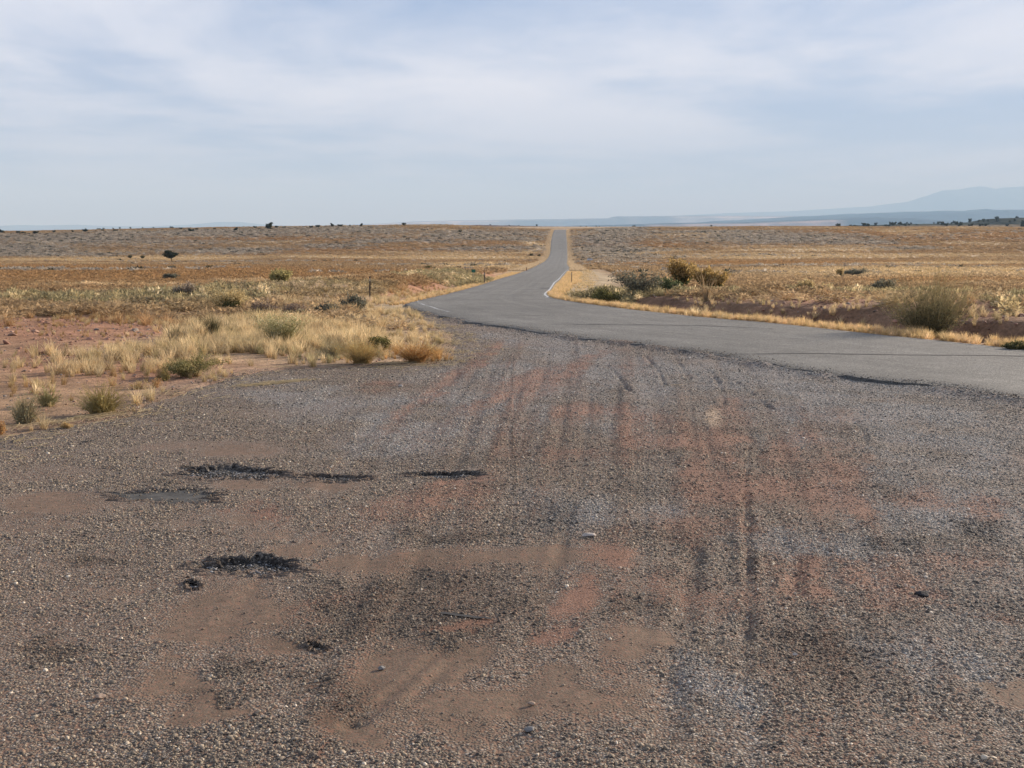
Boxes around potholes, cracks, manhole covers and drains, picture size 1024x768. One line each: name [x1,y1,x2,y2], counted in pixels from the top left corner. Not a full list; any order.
pothole [96,486,227,506]
pothole [293,472,381,484]
pothole [304,639,334,654]
pothole [183,577,206,592]
pothole [400,469,490,481]
pothole [175,551,327,579]
pothole [161,462,299,482]
